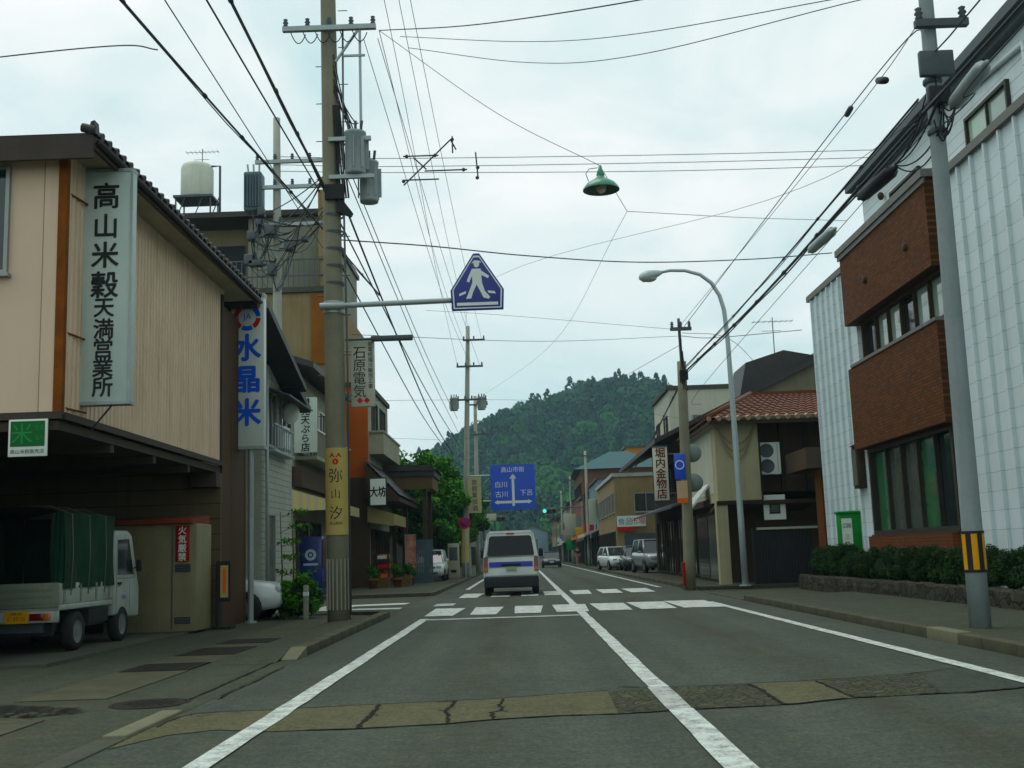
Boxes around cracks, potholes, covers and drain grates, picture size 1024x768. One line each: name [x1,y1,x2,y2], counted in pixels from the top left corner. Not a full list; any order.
crack [488,698,504,719]
crack [441,700,457,723]
crack [356,704,381,728]
manhole cover [108,698,191,710]
